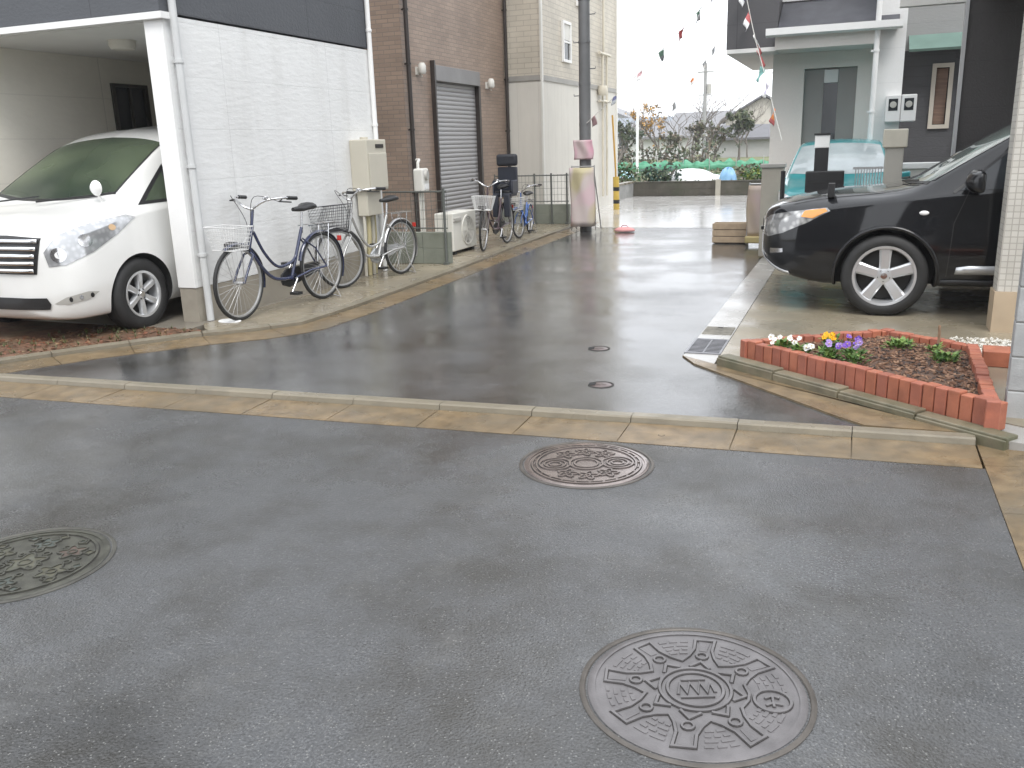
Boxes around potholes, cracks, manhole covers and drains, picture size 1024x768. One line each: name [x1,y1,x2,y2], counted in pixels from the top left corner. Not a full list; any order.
drain grate [684,338,730,355]
manhole cover [0,527,117,604]
manhole cover [519,441,654,489]
manhole cover [579,627,818,768]
